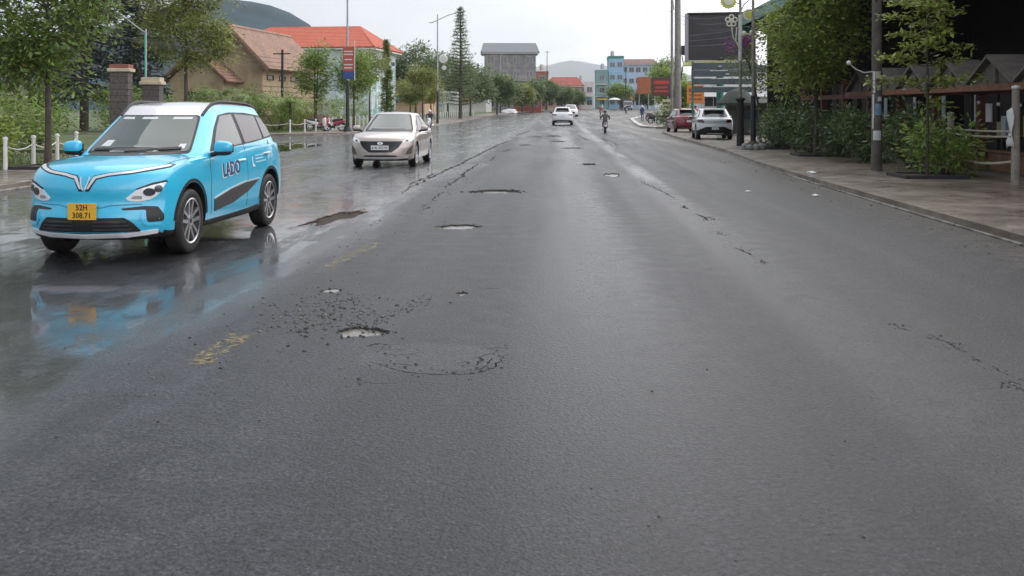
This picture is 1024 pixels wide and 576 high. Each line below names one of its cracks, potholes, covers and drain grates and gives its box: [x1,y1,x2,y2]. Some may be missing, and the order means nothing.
crack [893,324,1024,391]
crack [402,130,531,211]
pothole [336,326,397,339]
pothole [298,209,368,227]
